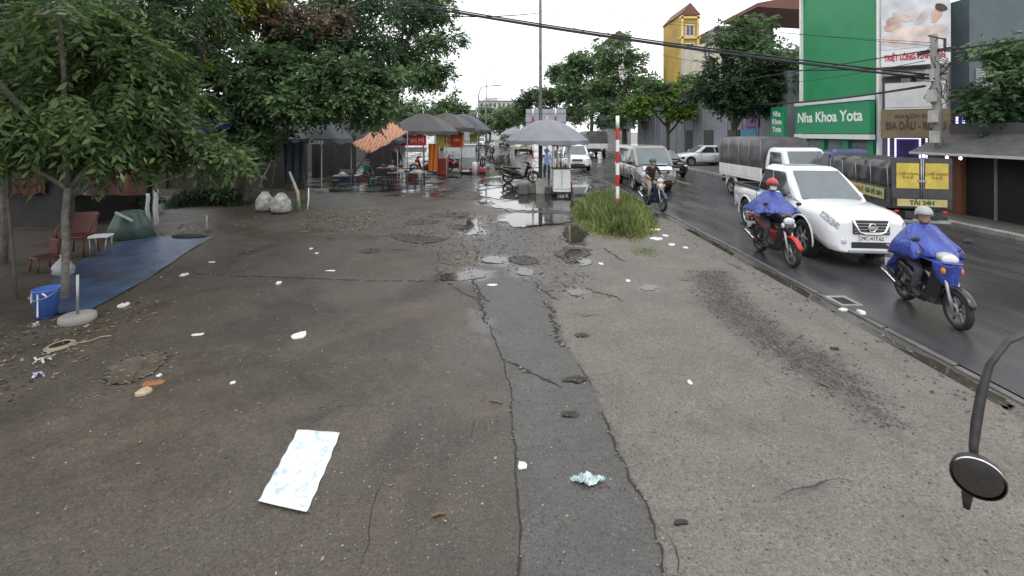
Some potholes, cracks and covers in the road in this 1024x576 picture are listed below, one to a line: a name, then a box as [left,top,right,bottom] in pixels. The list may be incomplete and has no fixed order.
crack [190,246,622,576]
pothole [508,255,539,265]
crack [599,409,680,576]
pothole [553,246,592,264]
